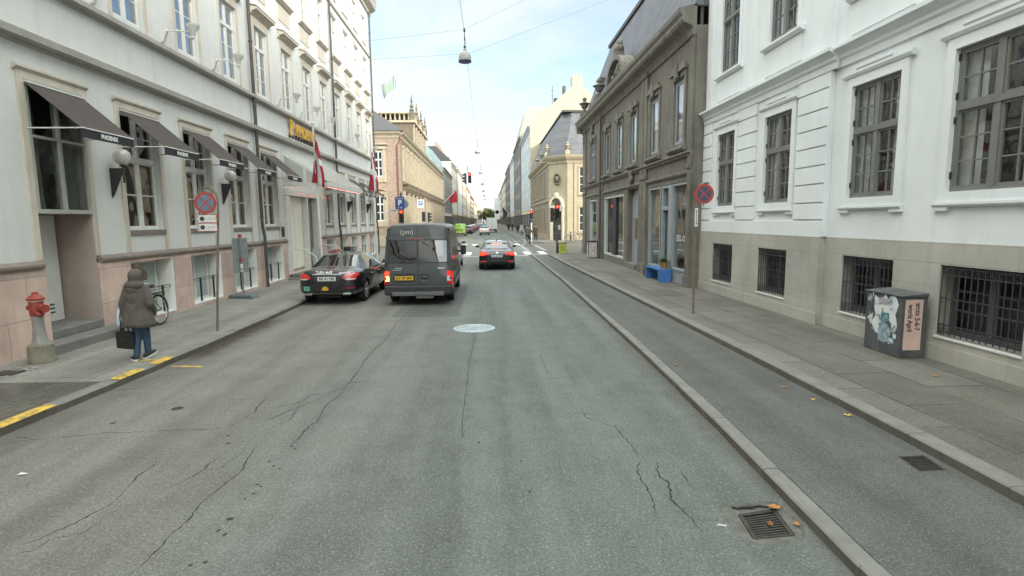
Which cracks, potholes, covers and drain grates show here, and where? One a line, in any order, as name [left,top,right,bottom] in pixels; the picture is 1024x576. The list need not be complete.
drain grate [738,509,795,540]
crack [133,445,258,572]
crack [581,411,701,531]
crack [22,462,157,553]
manhole cover [453,324,495,332]
drain grate [898,456,945,472]
crack [267,310,410,446]
